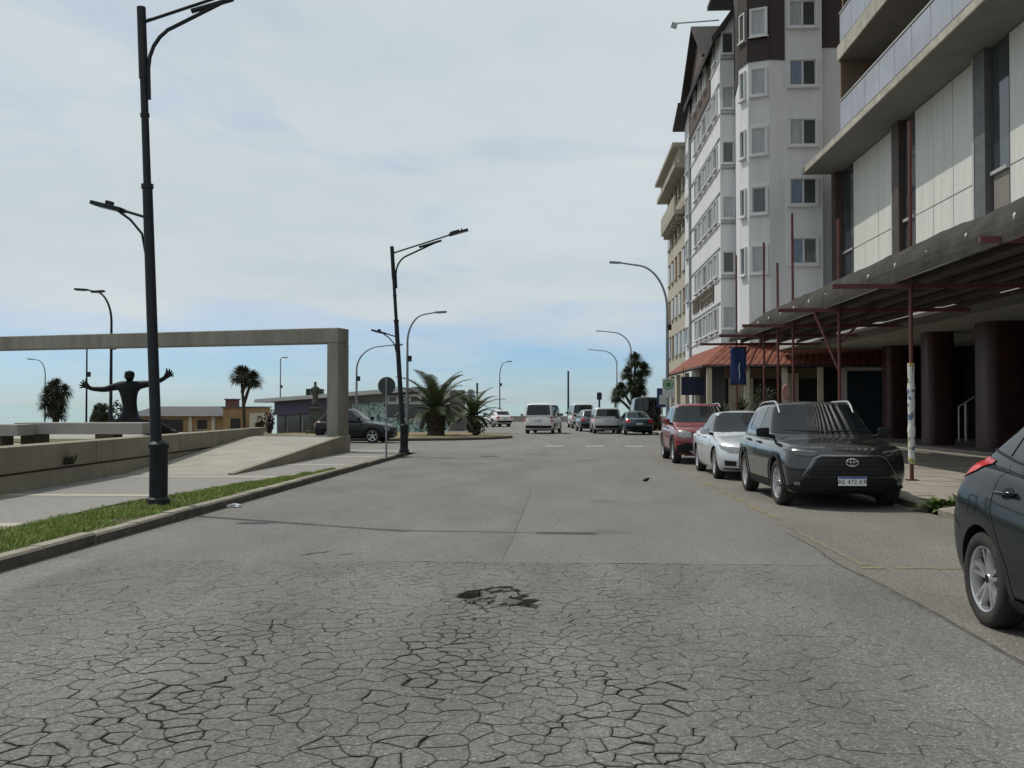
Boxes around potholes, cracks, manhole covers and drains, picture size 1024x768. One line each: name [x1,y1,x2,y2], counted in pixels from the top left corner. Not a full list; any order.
crack [0,560,1007,768]
crack [297,533,1024,666]
pothole [457,586,540,609]
